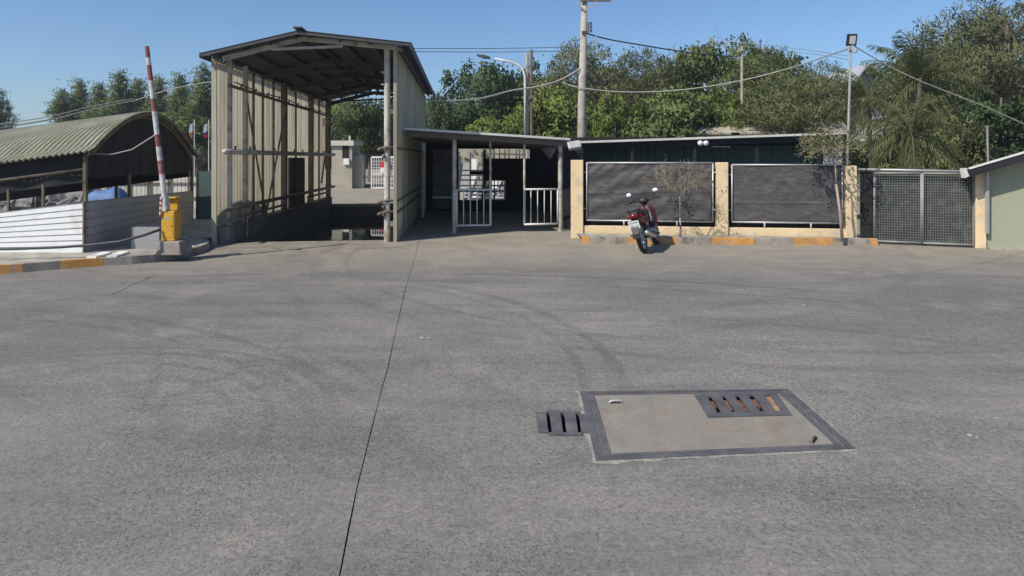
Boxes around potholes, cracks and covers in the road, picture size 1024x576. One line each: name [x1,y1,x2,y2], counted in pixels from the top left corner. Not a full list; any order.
drain grate [536,410,592,436]
manhole cover [575,388,858,464]
